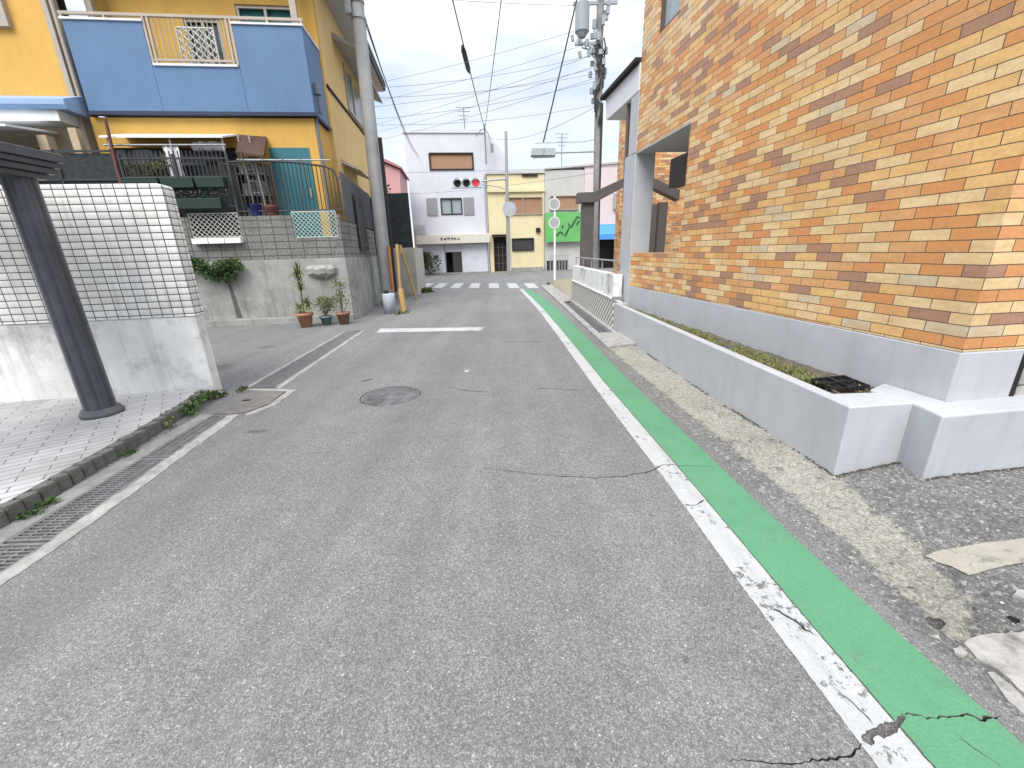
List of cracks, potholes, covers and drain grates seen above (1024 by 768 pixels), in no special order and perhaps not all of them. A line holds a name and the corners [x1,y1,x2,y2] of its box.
drain grate [311,331,360,352]
crack [773,608,814,635]
drain grate [250,352,328,388]
drain grate [5,457,168,544]
drain grate [144,415,227,458]
drain grate [0,542,48,573]
crack [725,696,1000,766]
crack [452,464,677,479]
pothole [925,616,946,630]
pothole [861,716,905,745]
drain grate [579,315,609,332]
manhole cover [357,386,423,407]
